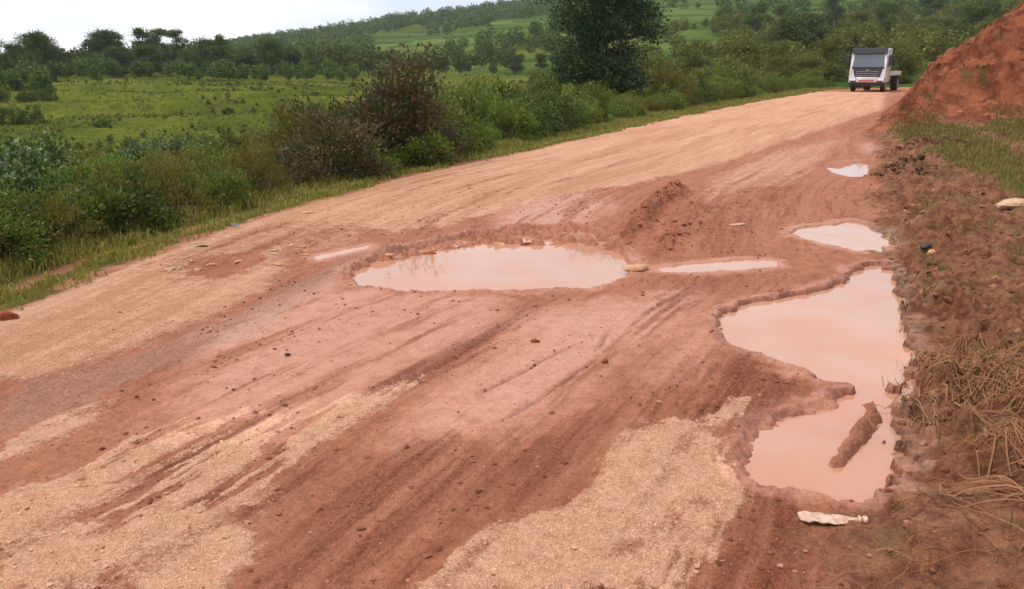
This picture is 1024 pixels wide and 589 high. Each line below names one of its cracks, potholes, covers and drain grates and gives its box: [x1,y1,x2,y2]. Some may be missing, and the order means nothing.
pothole [811,155,876,179]
pothole [782,214,924,253]
pothole [333,220,647,295]
pothole [306,242,378,261]
pothole [699,259,958,509]
pothole [648,256,790,275]
